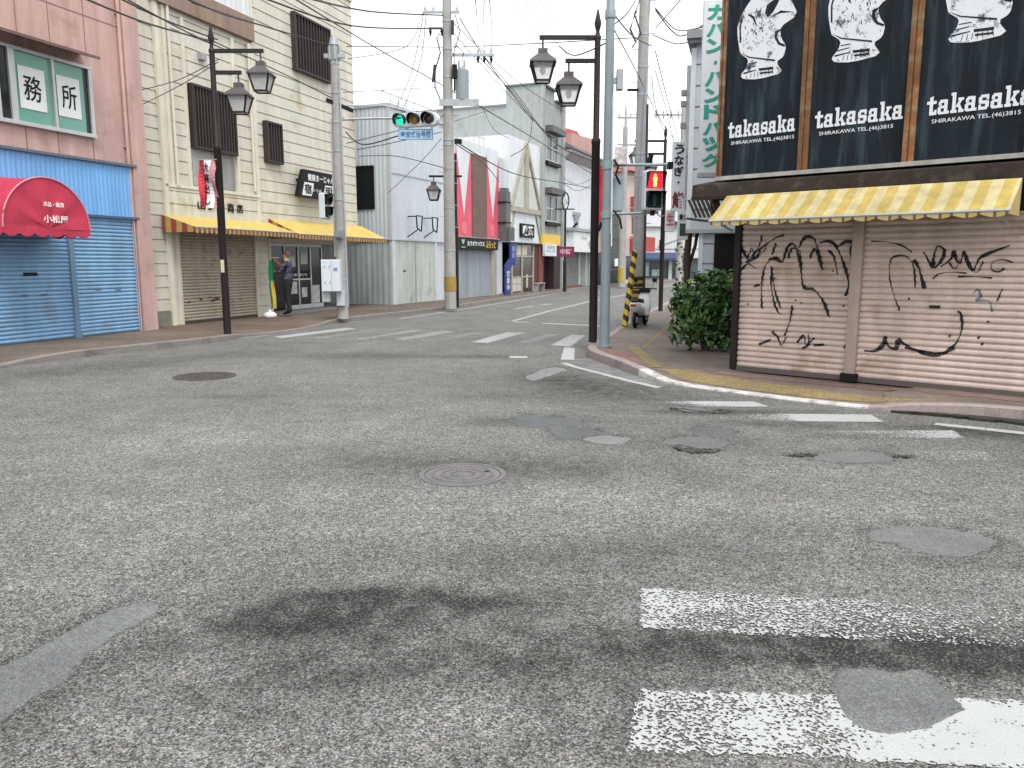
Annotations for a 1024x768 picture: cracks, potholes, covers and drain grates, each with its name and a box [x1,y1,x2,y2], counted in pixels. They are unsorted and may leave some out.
manhole cover [419,463,506,487]
manhole cover [172,372,237,381]
